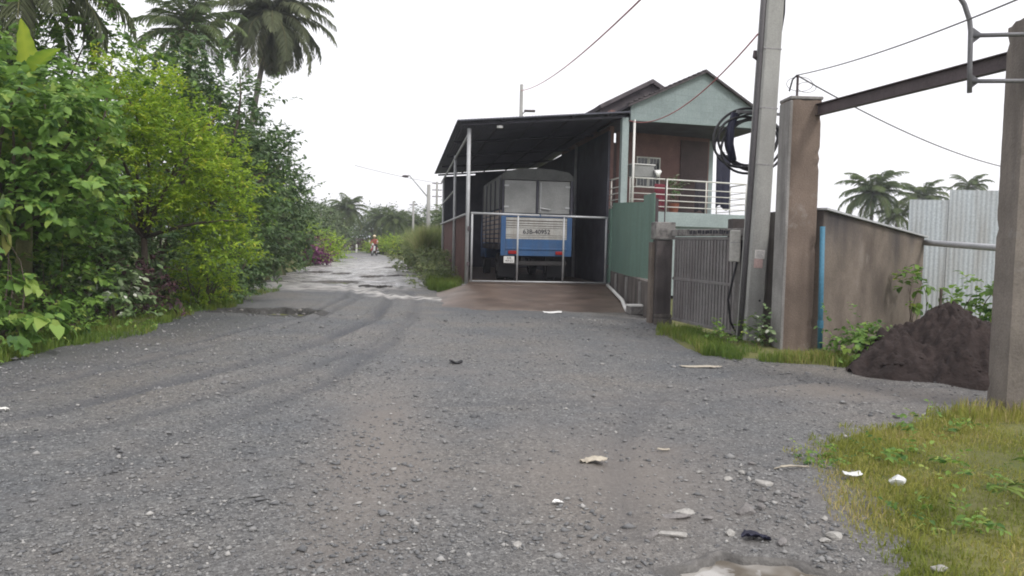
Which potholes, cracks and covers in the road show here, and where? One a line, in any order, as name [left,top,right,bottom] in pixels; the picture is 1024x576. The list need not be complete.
pothole [205,307,330,318]
